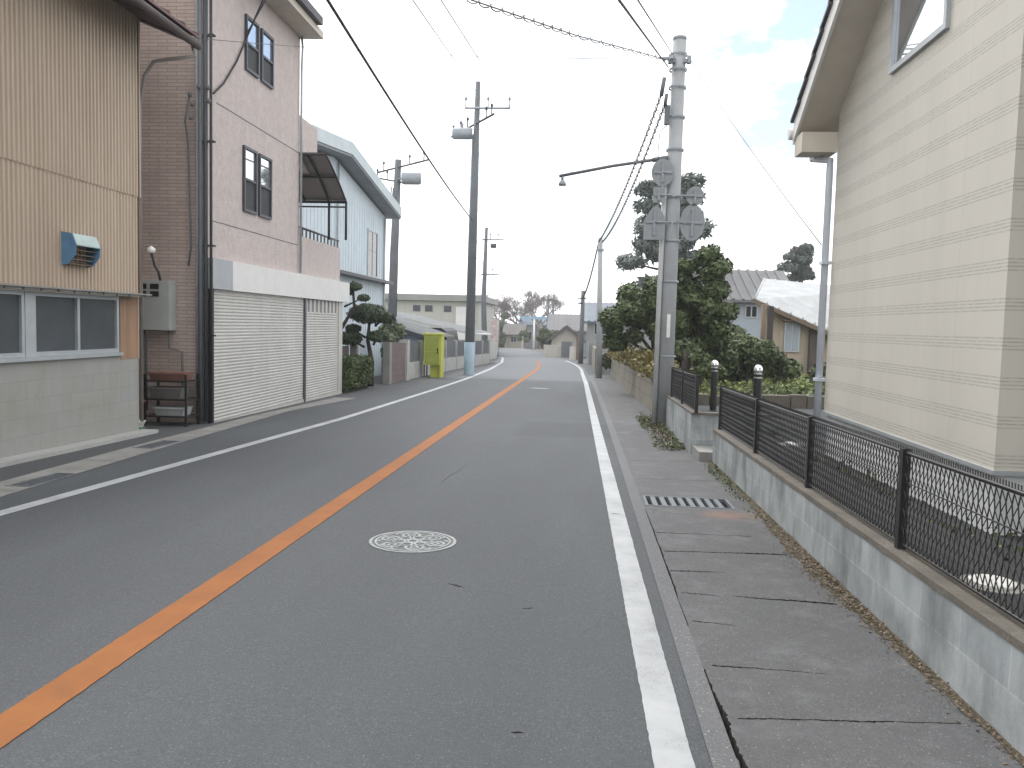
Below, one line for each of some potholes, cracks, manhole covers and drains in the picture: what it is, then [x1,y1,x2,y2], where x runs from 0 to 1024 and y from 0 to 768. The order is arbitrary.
drain grate [642,495,735,509]
drain grate [132,440,181,455]
crack [704,665,961,768]
drain grate [5,472,79,495]
manhole cover [369,531,456,553]
